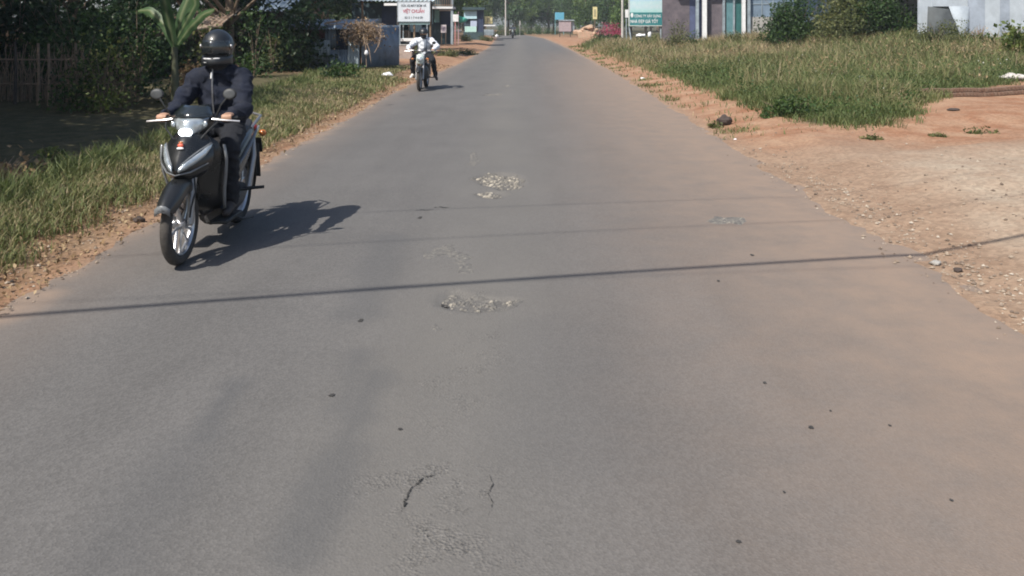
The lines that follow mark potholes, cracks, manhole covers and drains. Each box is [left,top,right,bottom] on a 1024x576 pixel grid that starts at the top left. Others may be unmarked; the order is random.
pothole [442,295,525,313]
pothole [470,173,526,191]
